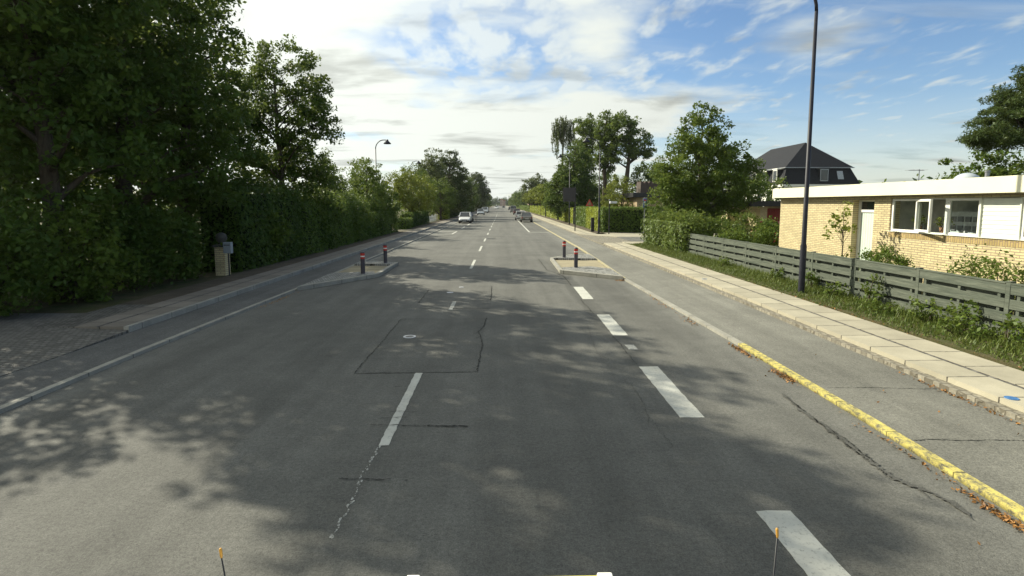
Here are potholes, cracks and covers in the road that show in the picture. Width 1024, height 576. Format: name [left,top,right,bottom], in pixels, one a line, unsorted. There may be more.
crack [781,393,973,519]
